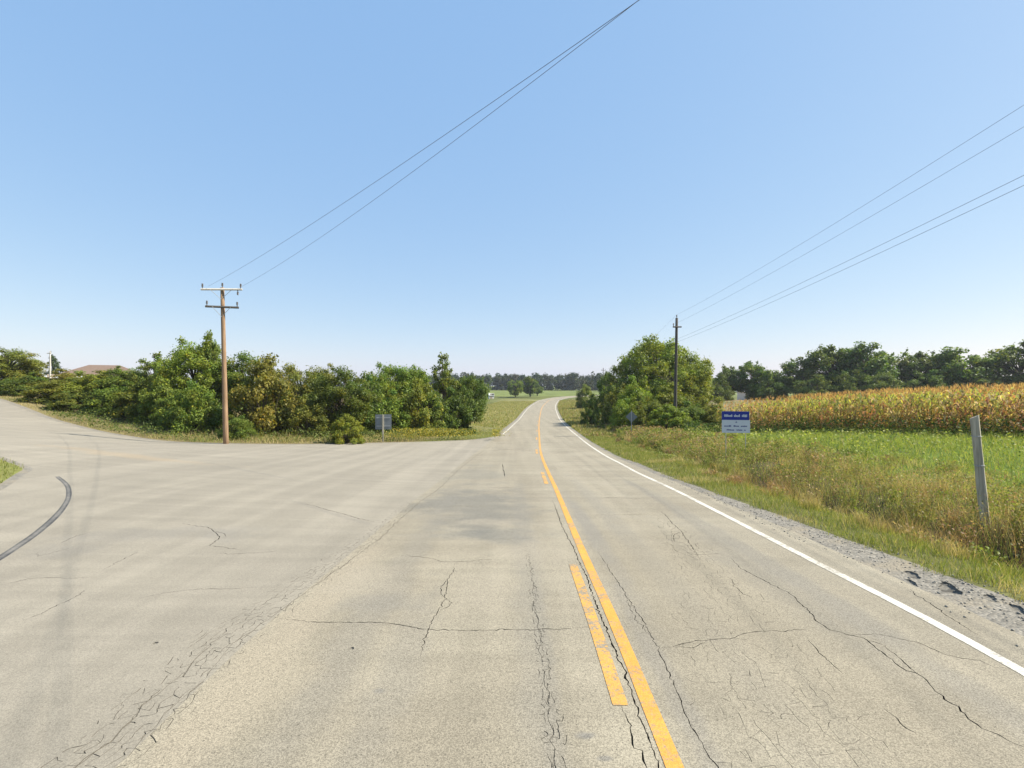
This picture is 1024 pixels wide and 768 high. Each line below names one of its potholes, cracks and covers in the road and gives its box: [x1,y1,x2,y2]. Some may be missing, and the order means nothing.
crack [282,556,583,657]
crack [658,512,718,560]
crack [662,543,904,768]
crack [526,558,567,768]
